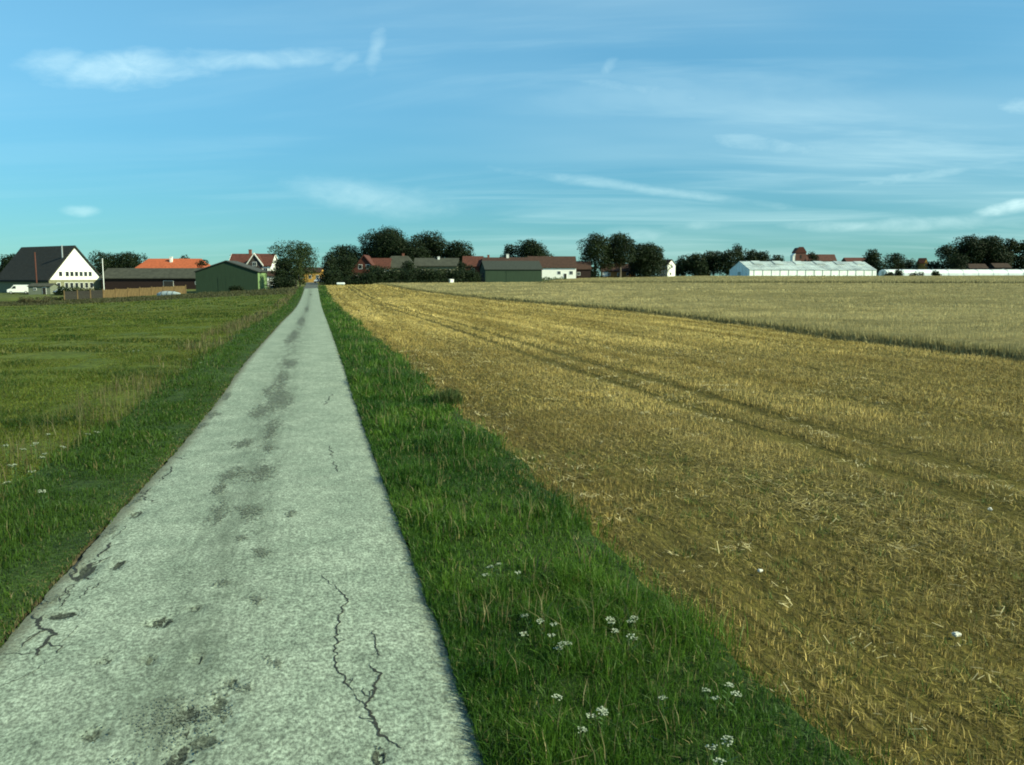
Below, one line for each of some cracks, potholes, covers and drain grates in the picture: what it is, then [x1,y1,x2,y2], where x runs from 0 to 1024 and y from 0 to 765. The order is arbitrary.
pothole [73,558,101,581]
crack [321,575,401,748]
pothole [190,730,223,752]
pothole [170,707,209,727]
crack [1,457,188,686]
pothole [203,693,231,719]
